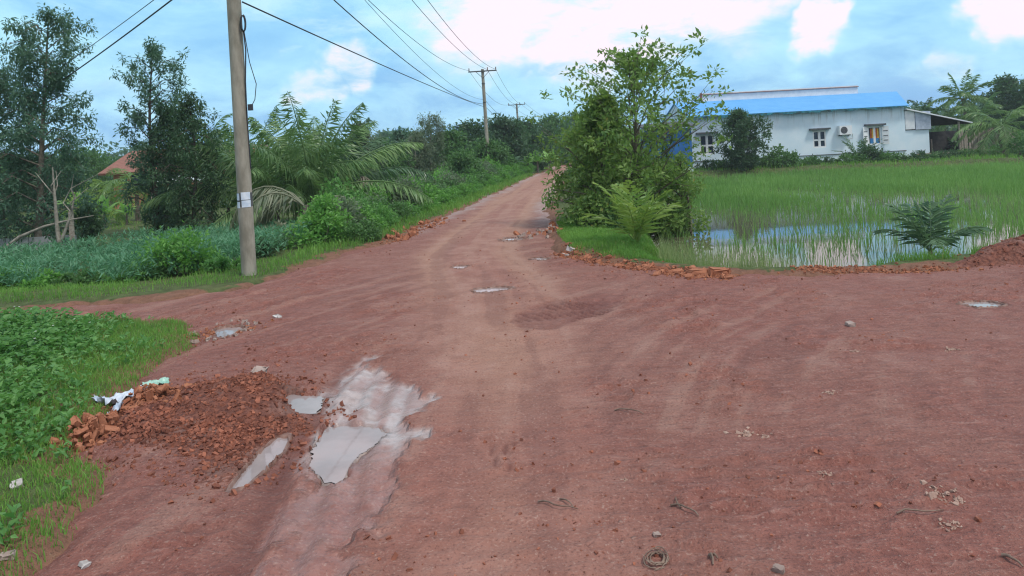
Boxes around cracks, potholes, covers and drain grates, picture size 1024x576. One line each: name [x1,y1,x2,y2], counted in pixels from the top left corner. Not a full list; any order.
pothole [286,395,326,414]
pothole [309,426,387,486]
pothole [469,285,516,294]
pothole [224,432,294,493]
pothole [211,324,250,338]
pothole [956,299,1009,309]
